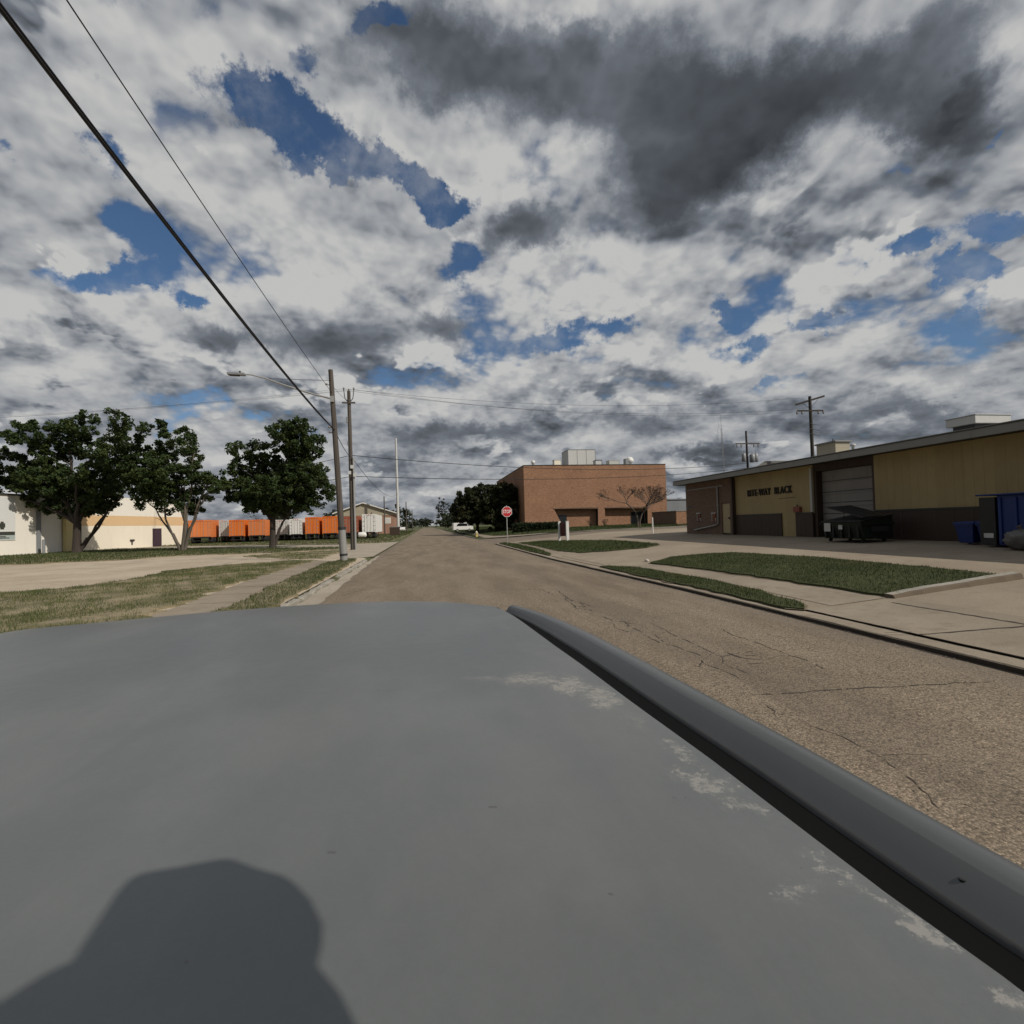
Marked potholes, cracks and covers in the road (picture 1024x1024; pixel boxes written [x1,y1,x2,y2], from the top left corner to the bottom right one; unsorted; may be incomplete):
crack [811,725,948,814]
crack [501,589,820,676]
